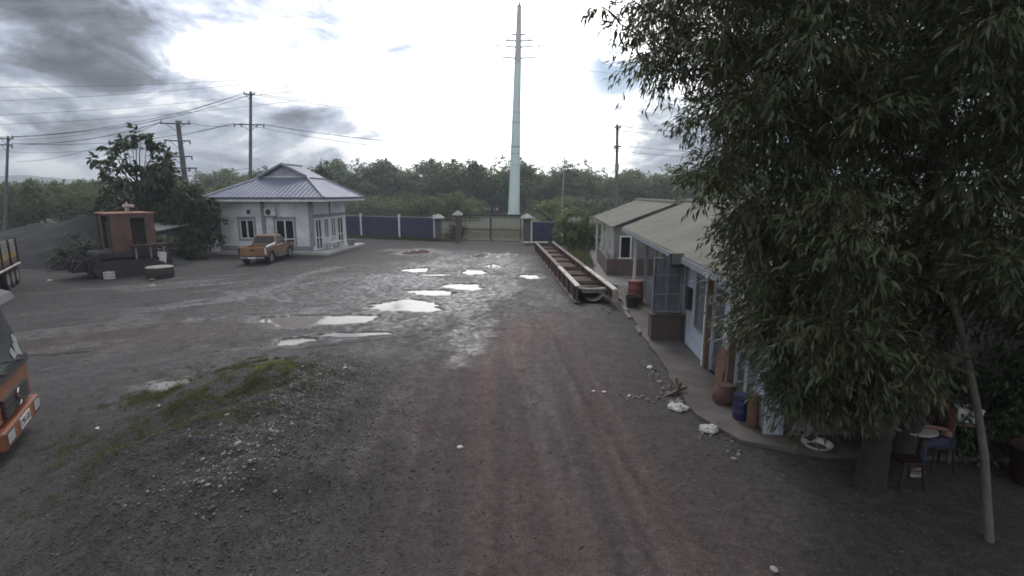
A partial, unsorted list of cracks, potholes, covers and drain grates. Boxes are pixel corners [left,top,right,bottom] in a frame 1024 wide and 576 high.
pothole [352,296,459,314]
pothole [138,375,197,393]
pothole [268,335,326,348]
pothole [392,248,436,256]
pothole [391,288,469,297]
pothole [237,312,406,331]
pothole [429,281,494,292]
pothole [456,266,494,276]
